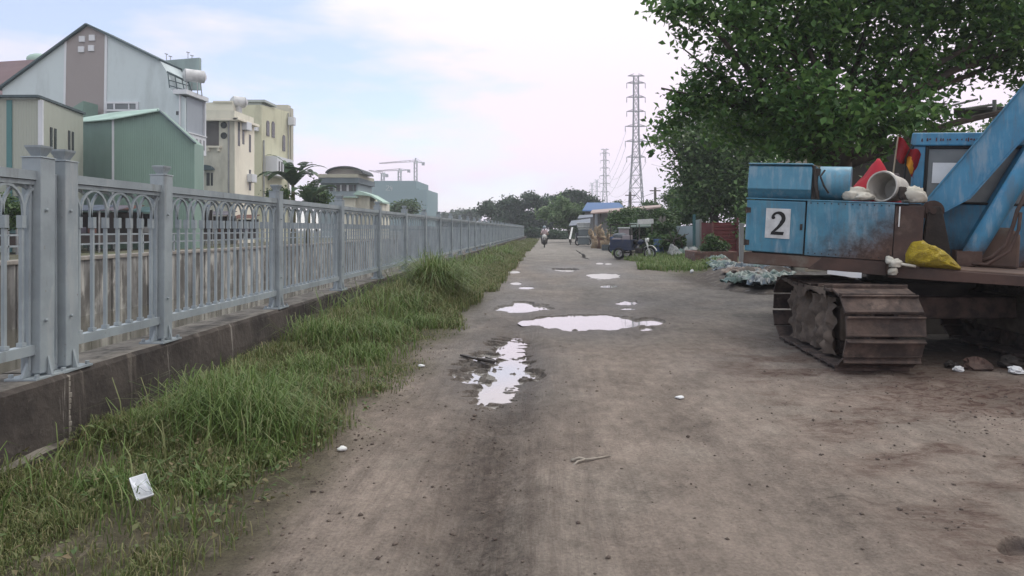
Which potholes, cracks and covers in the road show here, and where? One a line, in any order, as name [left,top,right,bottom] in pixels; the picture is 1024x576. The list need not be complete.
pothole [518,314,666,331]
pothole [997,536,1024,556]
pothole [447,337,547,410]
